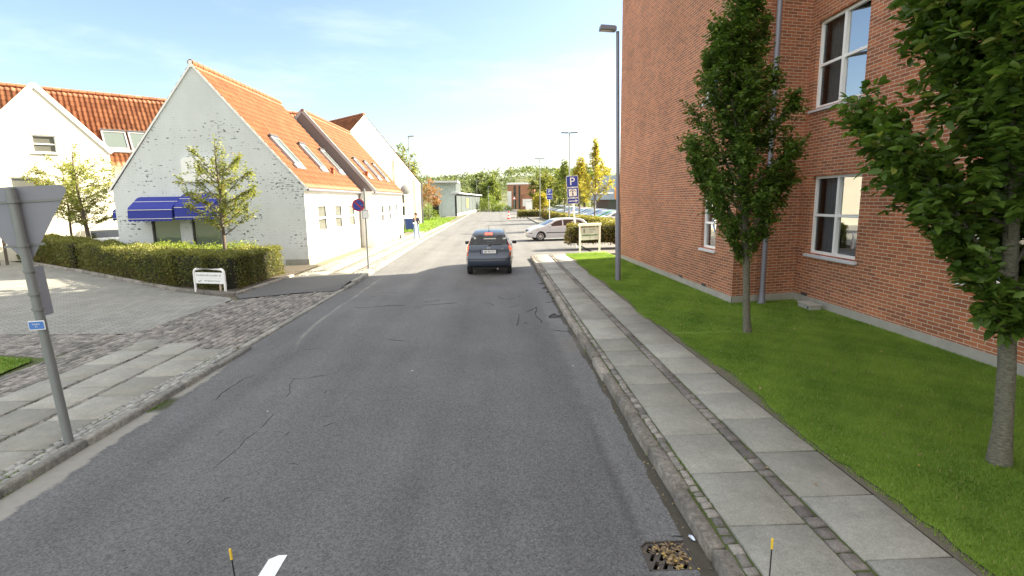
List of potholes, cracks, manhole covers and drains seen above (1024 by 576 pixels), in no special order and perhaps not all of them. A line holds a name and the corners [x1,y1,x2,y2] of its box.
drain grate [640,540,700,571]
crack [489,296,570,332]
